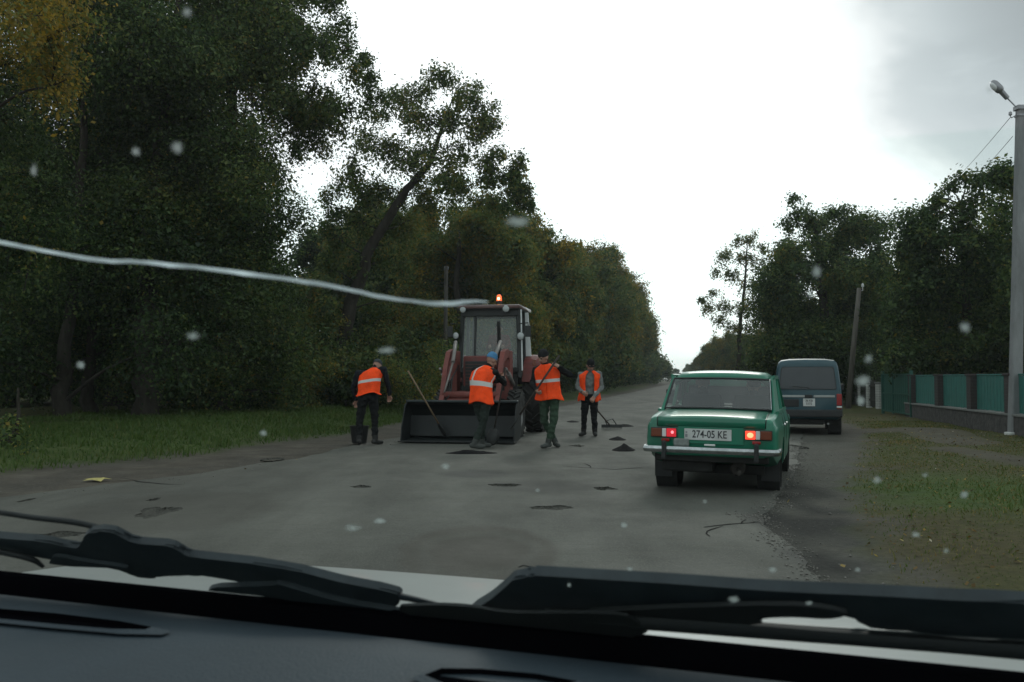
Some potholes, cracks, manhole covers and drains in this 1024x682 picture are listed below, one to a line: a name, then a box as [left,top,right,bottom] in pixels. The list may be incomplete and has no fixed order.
pothole [134,507,183,519]
crack [706,519,753,536]
